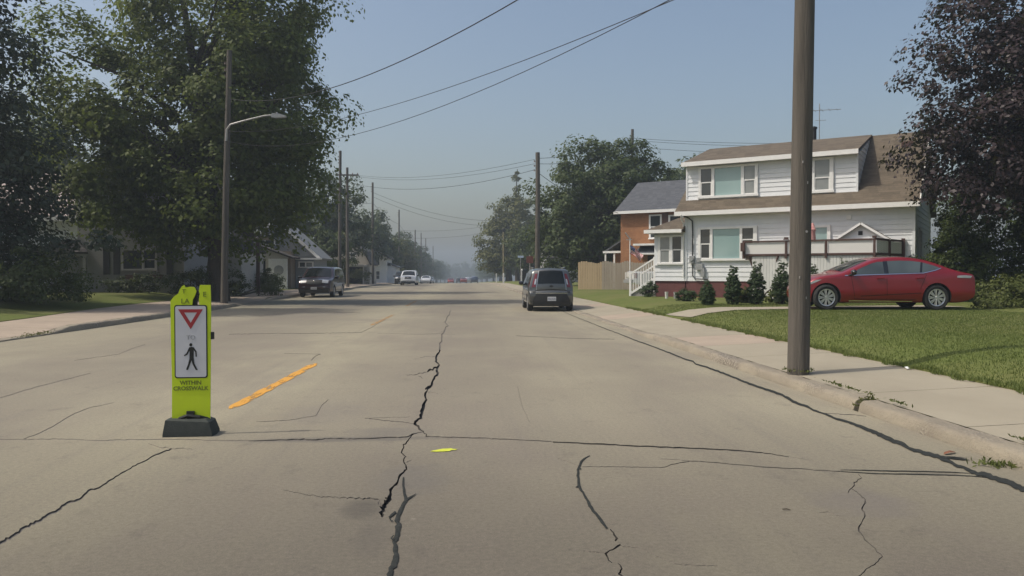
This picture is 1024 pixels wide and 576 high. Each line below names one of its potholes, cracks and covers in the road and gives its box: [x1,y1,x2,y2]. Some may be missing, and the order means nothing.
crack [285,312,450,517]
crack [0,403,193,545]
crack [558,458,883,576]
